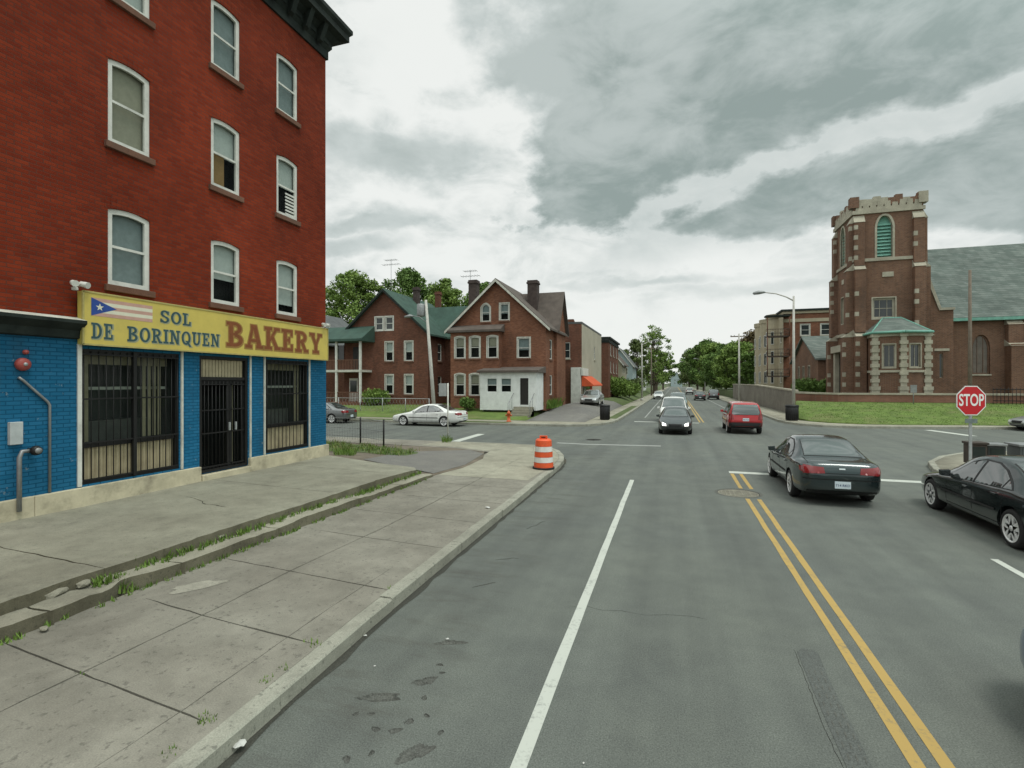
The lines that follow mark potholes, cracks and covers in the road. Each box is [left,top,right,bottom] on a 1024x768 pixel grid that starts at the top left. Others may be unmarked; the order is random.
manhole cover [714,488,763,498]
